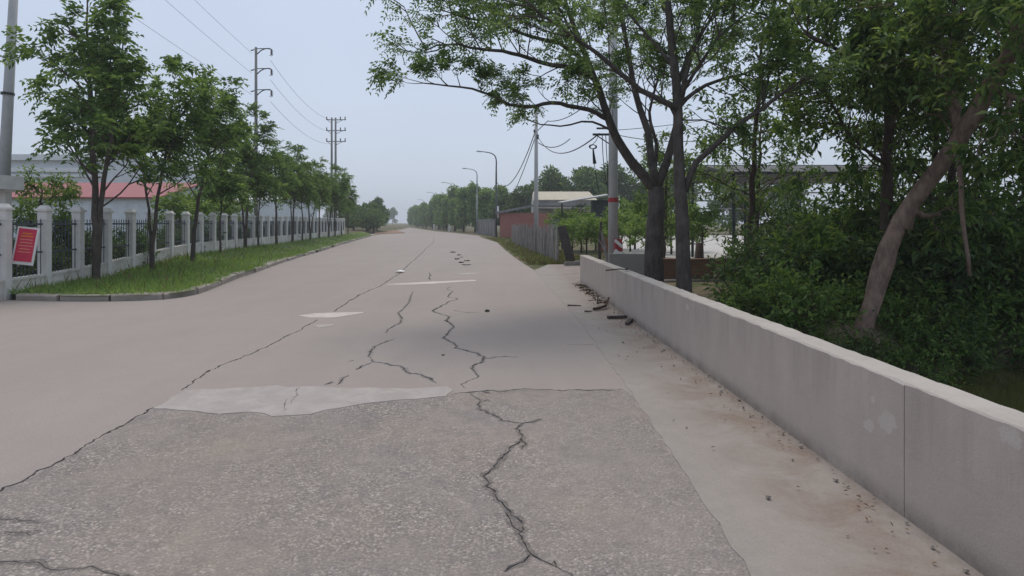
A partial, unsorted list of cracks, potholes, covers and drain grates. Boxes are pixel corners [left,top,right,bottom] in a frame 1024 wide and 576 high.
crack [432,289,621,573]
crack [0,561,130,576]
crack [0,518,41,535]
crack [324,292,436,385]
